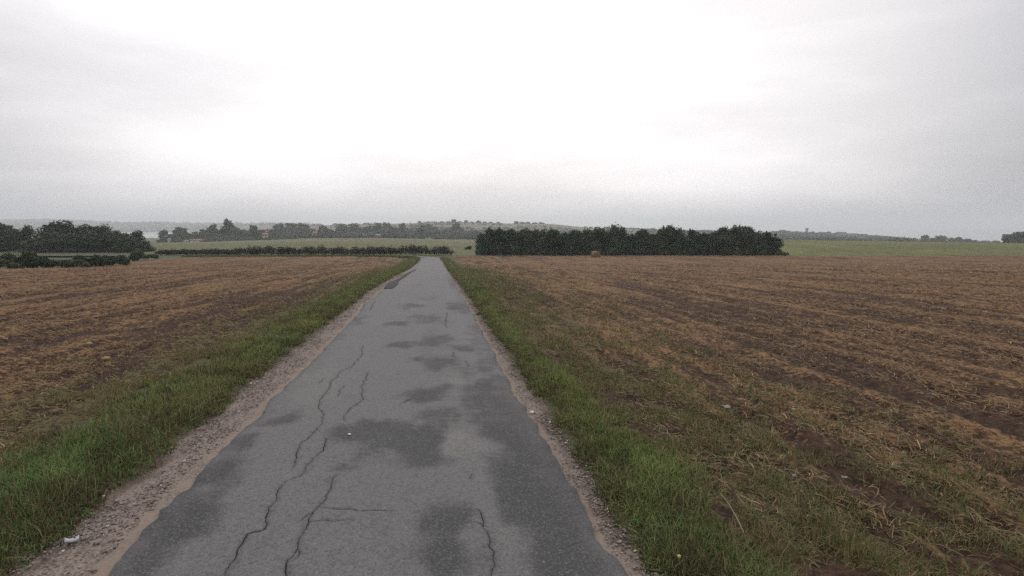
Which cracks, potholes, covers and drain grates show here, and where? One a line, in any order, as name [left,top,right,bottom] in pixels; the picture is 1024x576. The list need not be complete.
crack [225,346,367,572]
crack [473,512,495,575]
crack [284,479,380,576]
